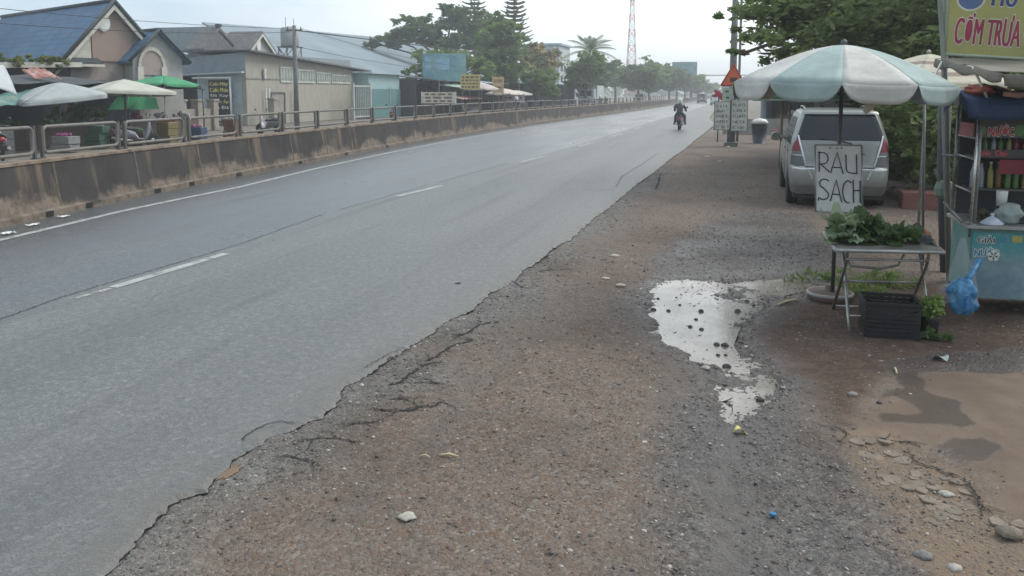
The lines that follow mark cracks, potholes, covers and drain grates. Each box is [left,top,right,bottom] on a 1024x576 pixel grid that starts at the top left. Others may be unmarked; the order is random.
crack [242,321,491,477]
crack [878,433,1004,515]
